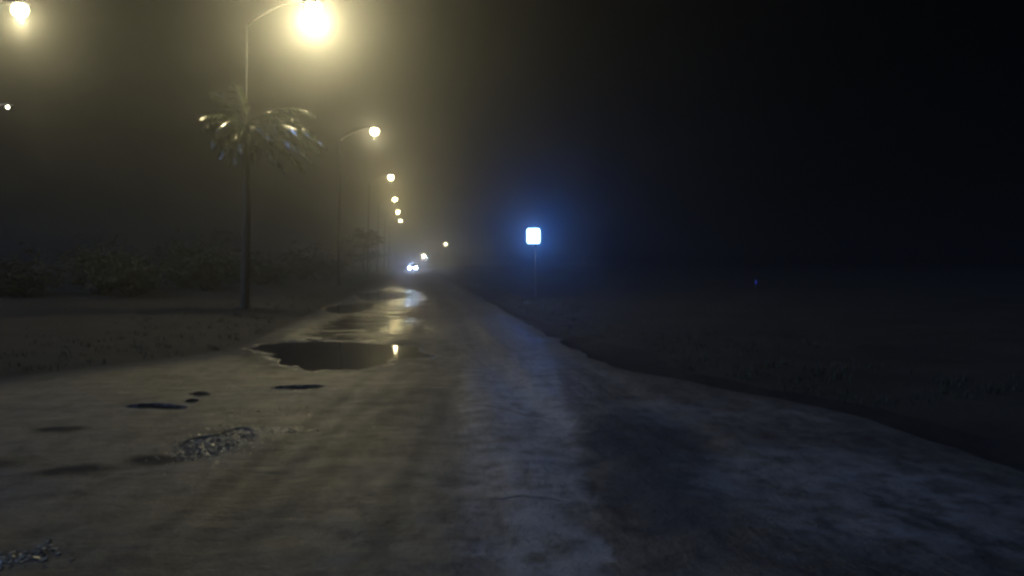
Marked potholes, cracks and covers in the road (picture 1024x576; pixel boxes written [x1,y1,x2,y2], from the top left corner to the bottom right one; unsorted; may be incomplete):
pothole [321,303,380,314]
pothole [123,402,189,410]
pothole [125,407,326,475]
pothole [241,339,441,373]
